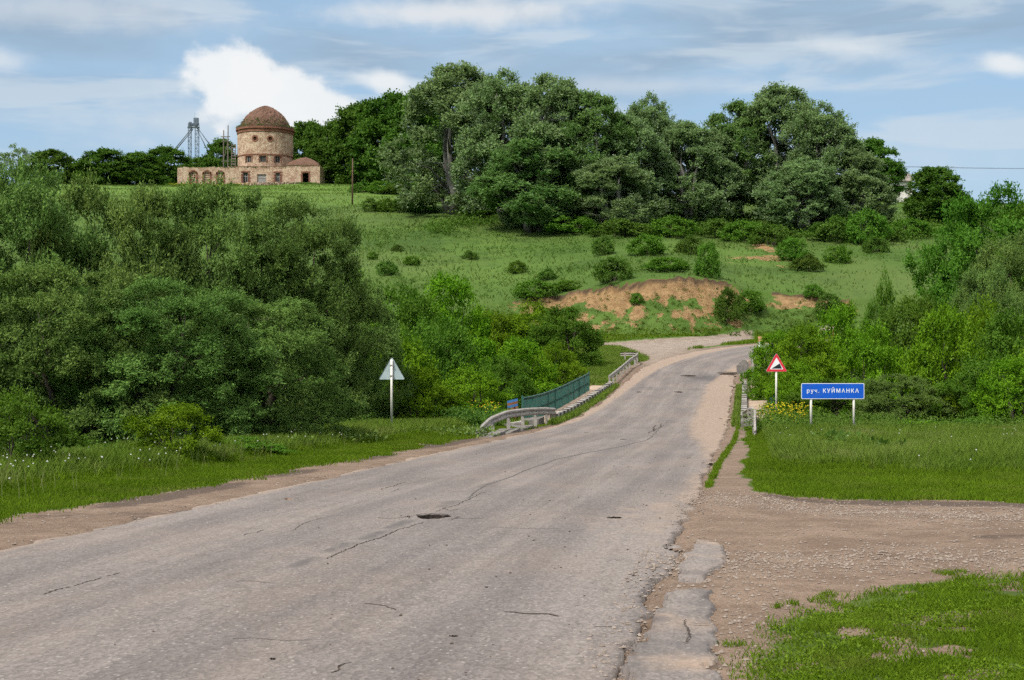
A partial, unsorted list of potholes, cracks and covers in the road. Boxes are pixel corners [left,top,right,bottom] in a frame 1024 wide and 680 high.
crack [327,493,481,559]
